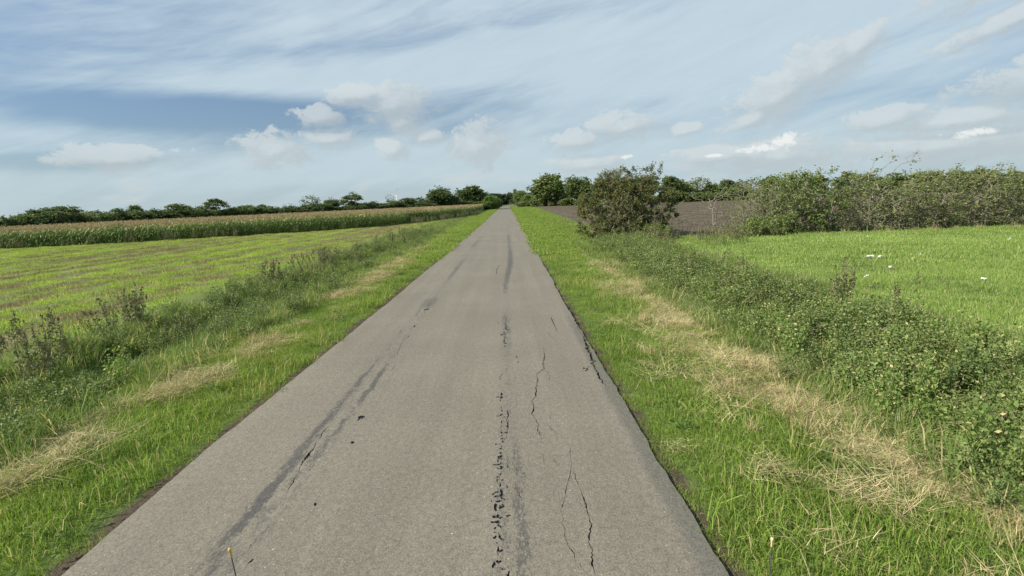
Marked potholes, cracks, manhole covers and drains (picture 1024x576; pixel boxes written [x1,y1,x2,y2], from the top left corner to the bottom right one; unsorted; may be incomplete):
crack [288,429,326,490]
crack [531,354,595,572]
crack [491,319,524,576]
